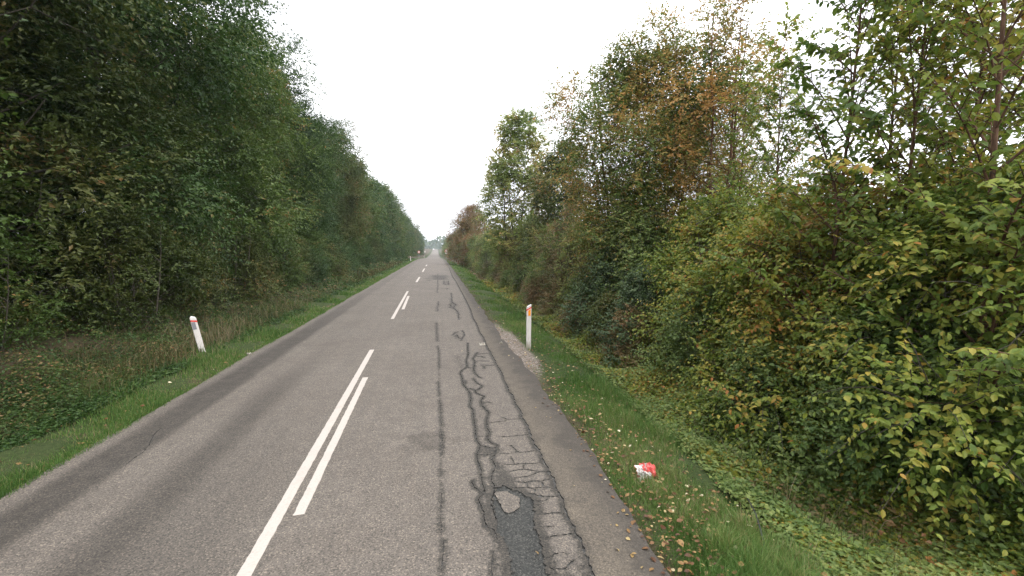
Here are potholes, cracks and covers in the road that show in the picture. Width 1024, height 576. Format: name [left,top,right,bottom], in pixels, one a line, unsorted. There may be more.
crack [430,271,595,576]
